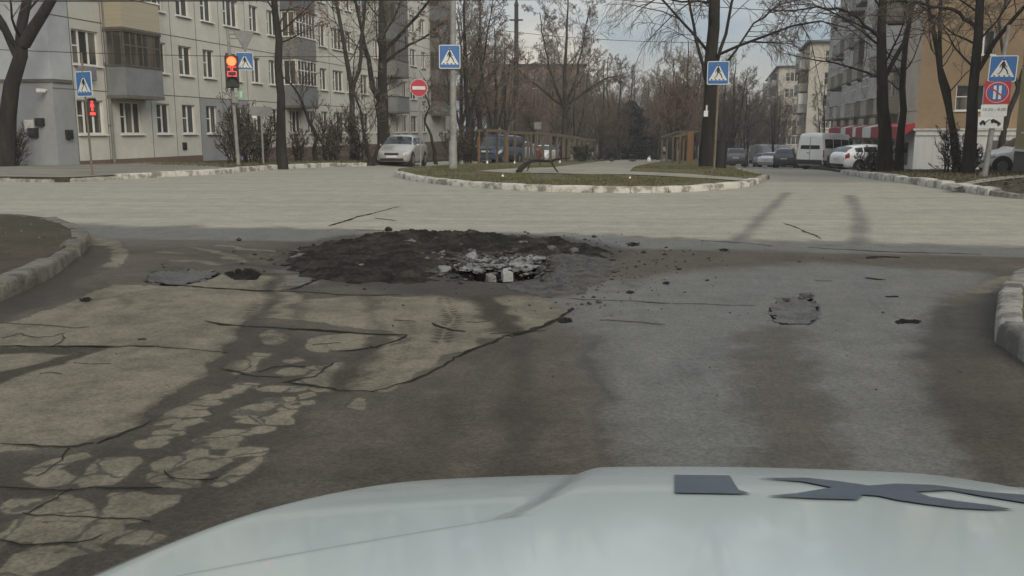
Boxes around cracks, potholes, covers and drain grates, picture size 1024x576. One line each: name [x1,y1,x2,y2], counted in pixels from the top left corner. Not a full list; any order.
crack [0,421,217,545]
pothole [433,252,550,283]
crack [785,223,971,258]
pothole [219,268,261,280]
crack [329,206,401,231]
pothole [764,297,825,325]
crack [1,298,754,392]
